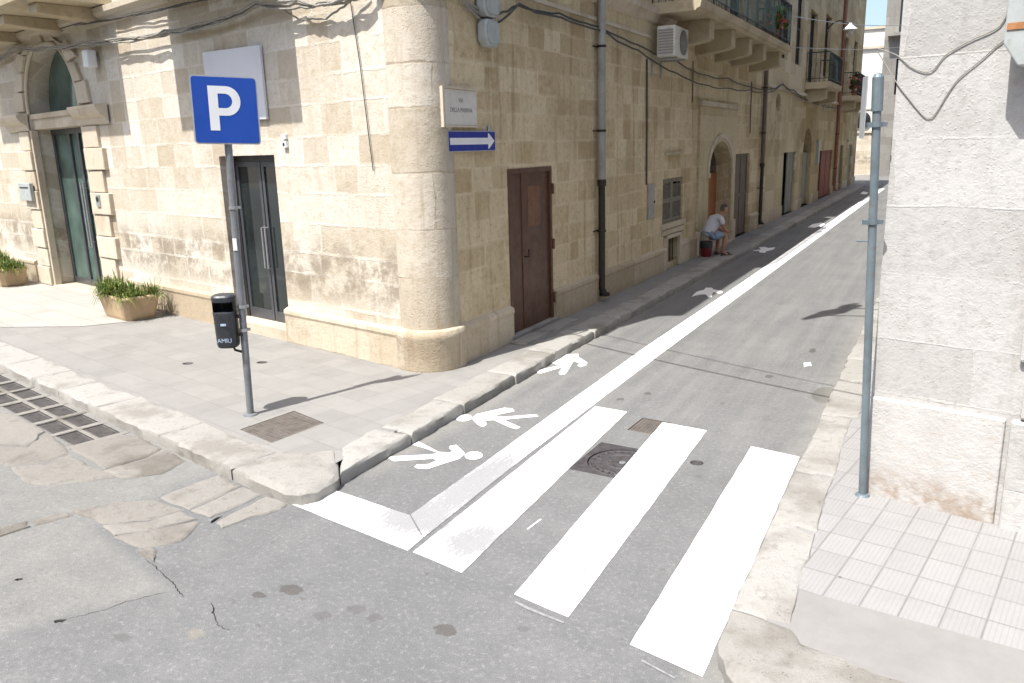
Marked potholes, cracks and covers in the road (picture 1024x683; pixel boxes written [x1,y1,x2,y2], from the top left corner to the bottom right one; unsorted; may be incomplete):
drain grate [0,382,26,391]
drain grate [20,411,52,423]
drain grate [83,424,120,438]
drain grate [3,402,35,414]
drain grate [12,389,41,399]
drain grate [0,394,17,404]
drain grate [45,405,77,417]
drain grate [56,431,94,445]
drain grate [36,420,73,434]
drain grate [63,414,98,427]
drain grate [28,397,59,408]
manhole cover [569,442,658,478]
